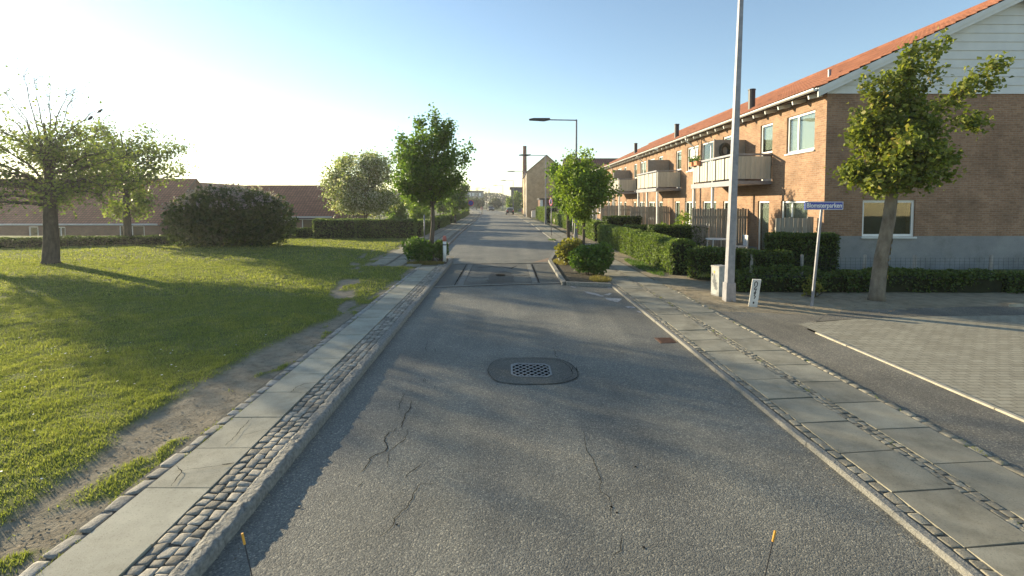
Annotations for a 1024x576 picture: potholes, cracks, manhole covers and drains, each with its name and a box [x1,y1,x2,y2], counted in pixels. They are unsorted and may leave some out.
crack [358,378,426,487]
drain grate [511,363,552,377]
crack [380,465,433,536]
